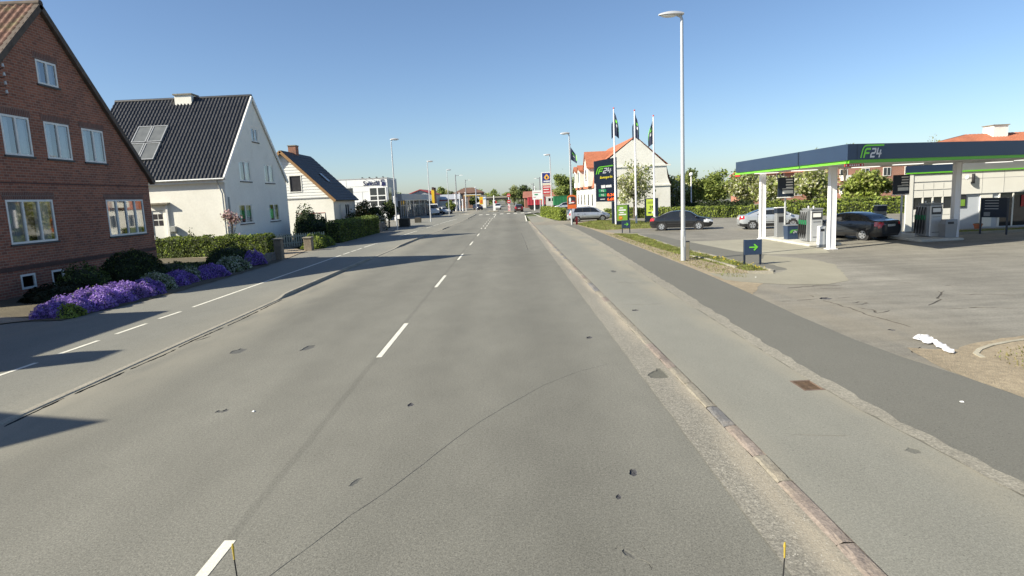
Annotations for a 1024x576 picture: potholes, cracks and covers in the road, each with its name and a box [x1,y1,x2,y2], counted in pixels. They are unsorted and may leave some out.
crack [790,285,910,327]
crack [270,365,602,576]
manhole cover [790,380,826,391]
